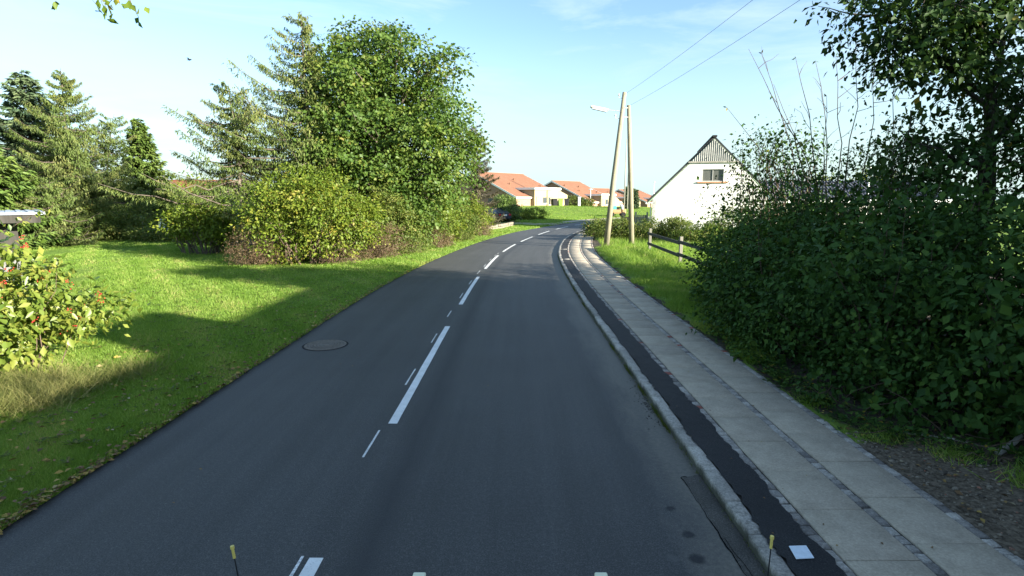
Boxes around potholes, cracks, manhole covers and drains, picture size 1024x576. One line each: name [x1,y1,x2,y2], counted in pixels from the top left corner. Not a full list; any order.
manhole cover [302,339,349,351]
